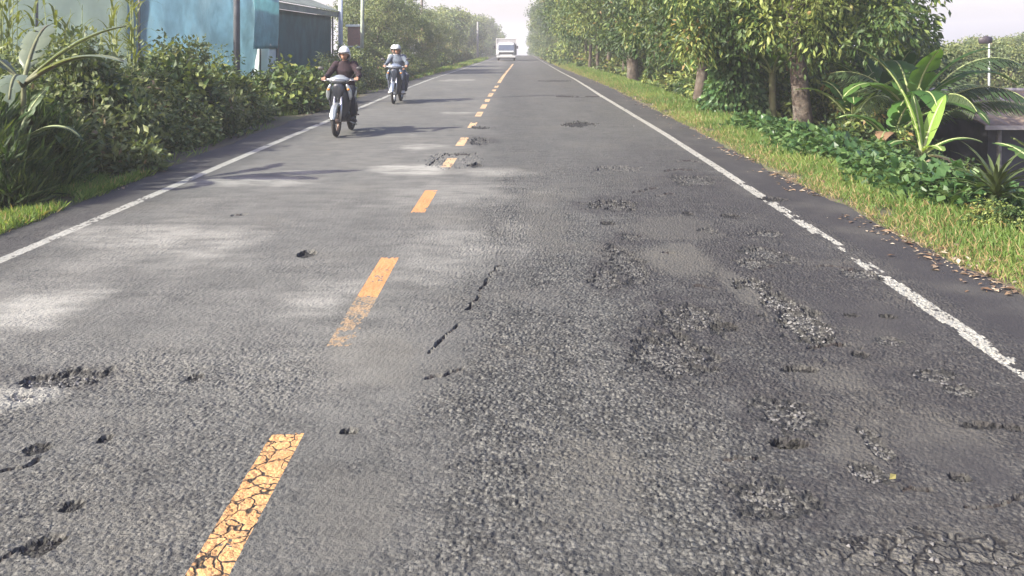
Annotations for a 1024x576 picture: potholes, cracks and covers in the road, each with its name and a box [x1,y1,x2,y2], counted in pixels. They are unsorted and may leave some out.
pothole [719,475,829,523]
pothole [19,536,69,558]
pothole [770,438,807,450]
pothole [16,366,114,390]
pothole [643,299,729,341]
pothole [625,324,728,385]
pothole [709,322,739,333]
pothole [728,276,861,362]
pothole [742,393,833,438]
pothole [22,443,52,456]
pothole [422,151,484,170]
pothole [581,199,637,212]
